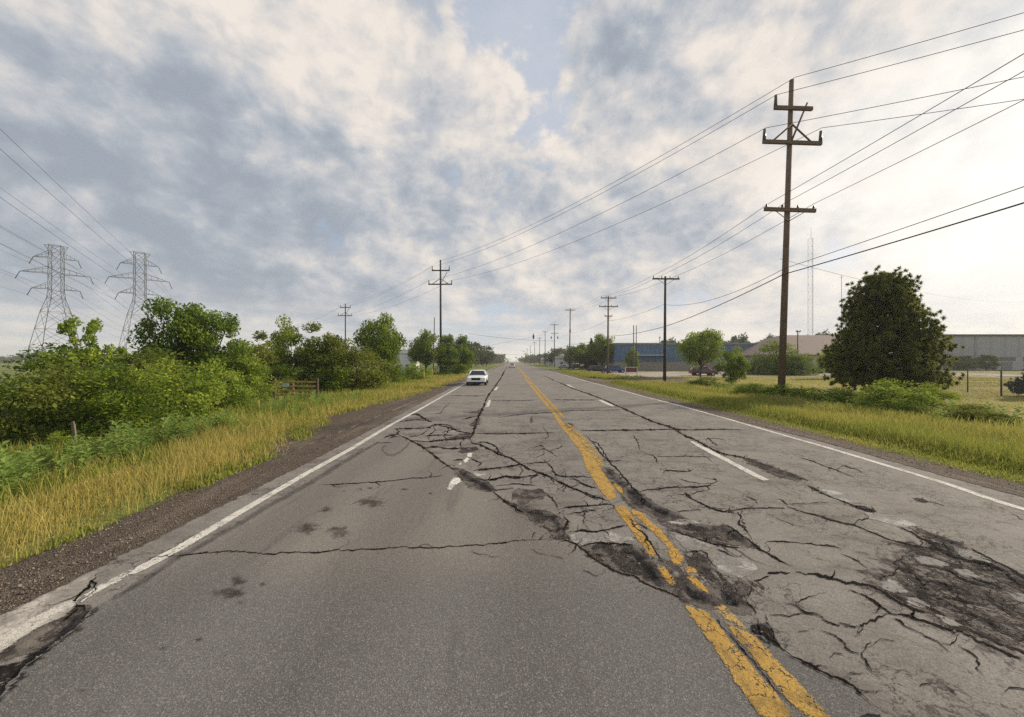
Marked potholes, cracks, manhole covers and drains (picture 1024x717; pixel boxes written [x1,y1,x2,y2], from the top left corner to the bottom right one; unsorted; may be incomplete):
pothole [683,551,730,587]
pothole [661,559,758,616]
pothole [663,523,761,549]
pothole [502,500,571,542]
pothole [743,457,809,482]
pothole [0,605,98,661]
crack [137,395,1024,709]
pothole [751,624,779,647]
